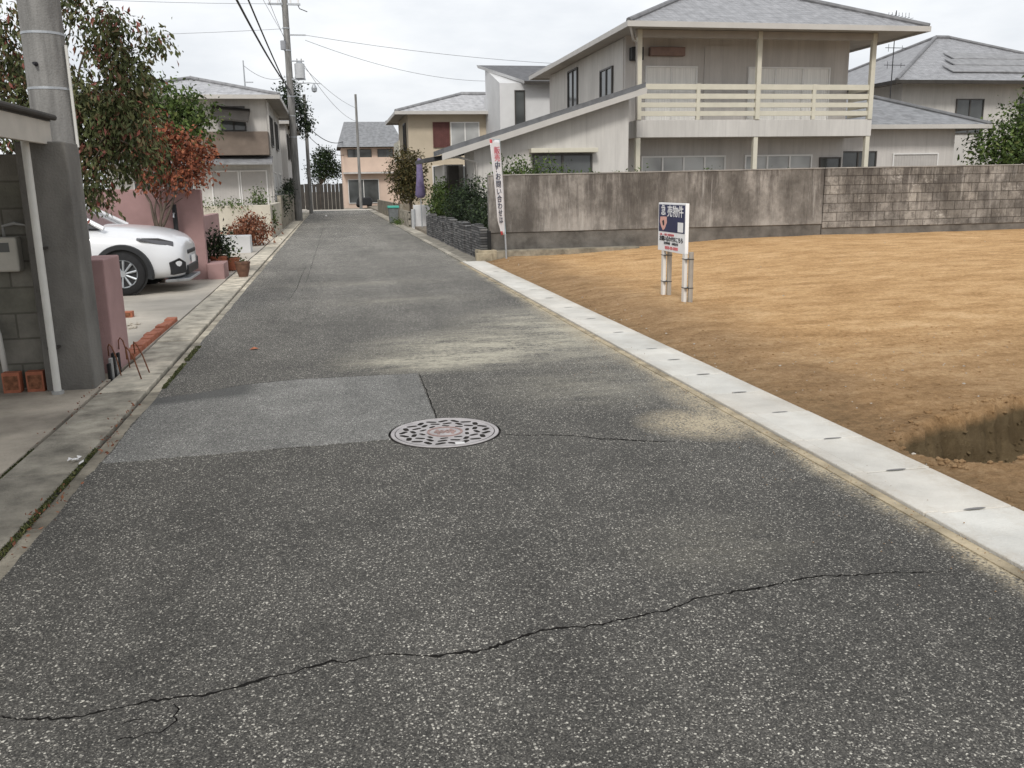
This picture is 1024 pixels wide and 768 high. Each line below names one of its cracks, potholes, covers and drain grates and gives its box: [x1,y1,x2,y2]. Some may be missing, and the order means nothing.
crack [0,571,953,744]
crack [507,434,677,442]
manhole cover [388,418,501,449]
